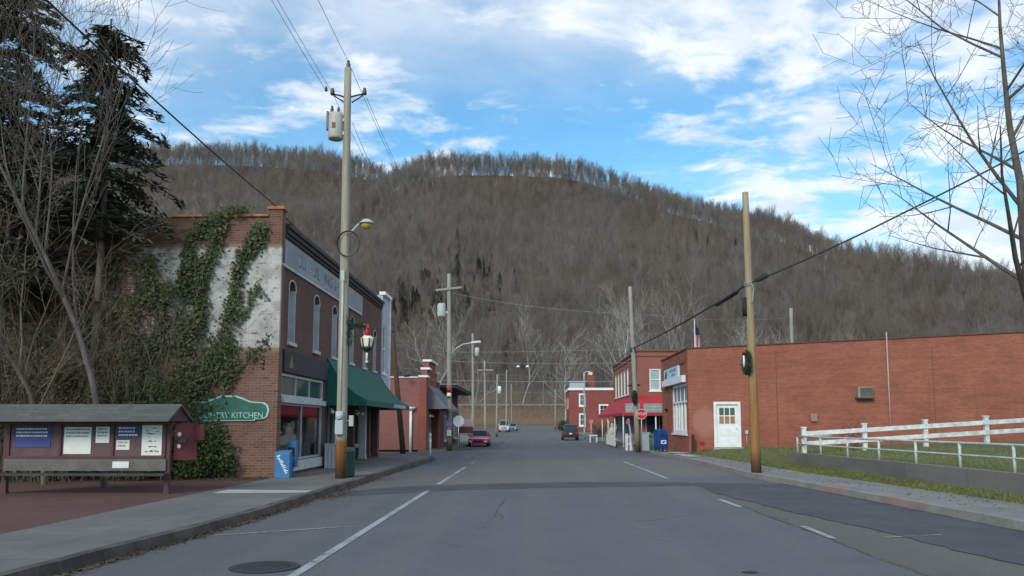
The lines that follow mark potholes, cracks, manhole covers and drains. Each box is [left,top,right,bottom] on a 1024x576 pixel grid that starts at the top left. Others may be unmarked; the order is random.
manhole cover [228,561,300,573]
